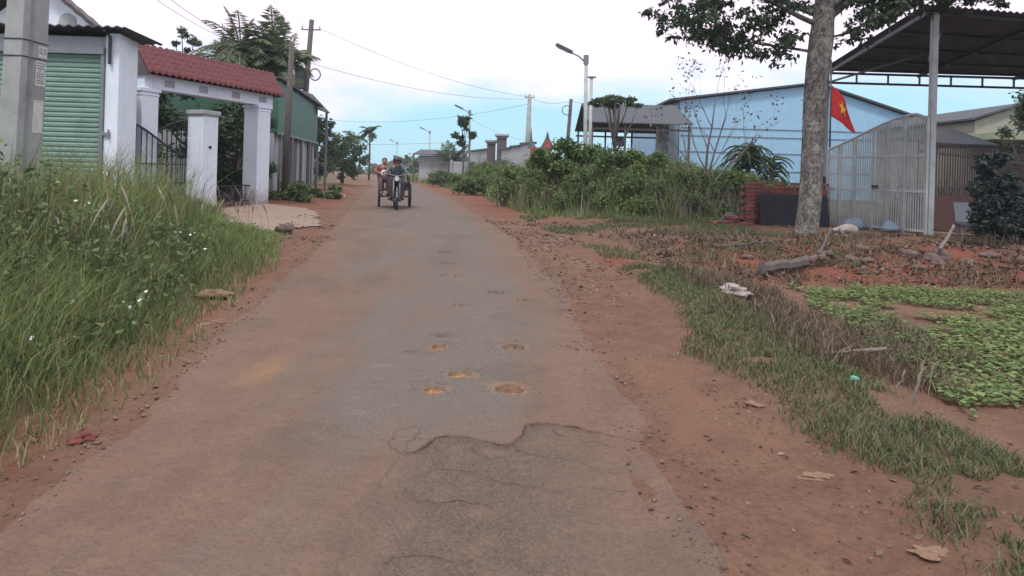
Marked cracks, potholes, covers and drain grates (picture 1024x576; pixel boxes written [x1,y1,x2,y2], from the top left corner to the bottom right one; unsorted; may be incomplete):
pothole [413,381,456,400]
pothole [481,378,542,401]
crack [389,422,645,507]
pothole [432,367,493,381]
crack [376,551,502,566]
pothole [416,341,461,354]
